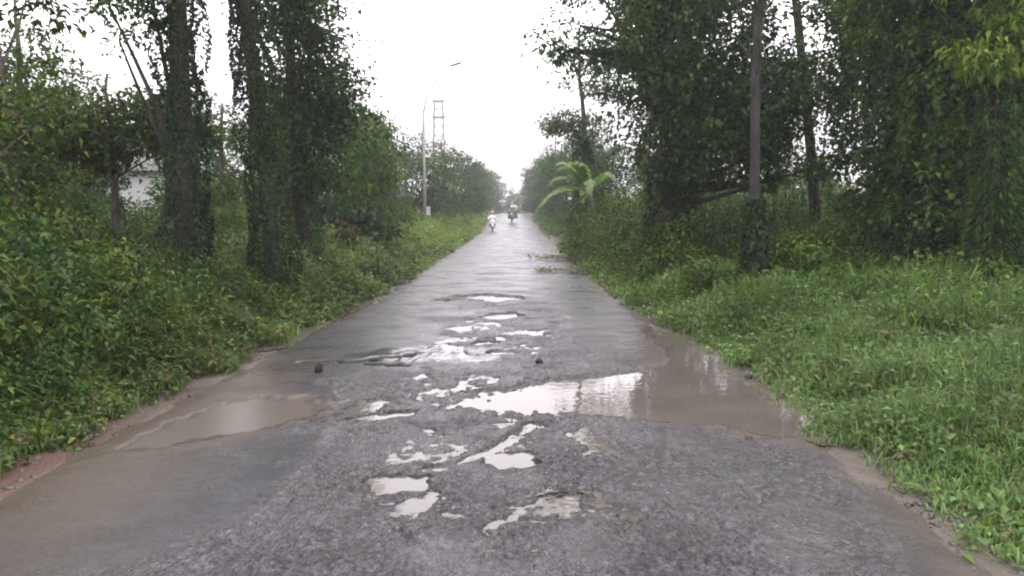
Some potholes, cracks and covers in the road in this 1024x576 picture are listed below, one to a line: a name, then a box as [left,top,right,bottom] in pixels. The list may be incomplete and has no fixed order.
pothole [413,322,837,446]
pothole [477,311,530,320]
pothole [352,469,438,499]
pothole [410,418,544,474]
pothole [335,407,427,423]
pothole [429,292,528,303]
pothole [482,492,591,527]
